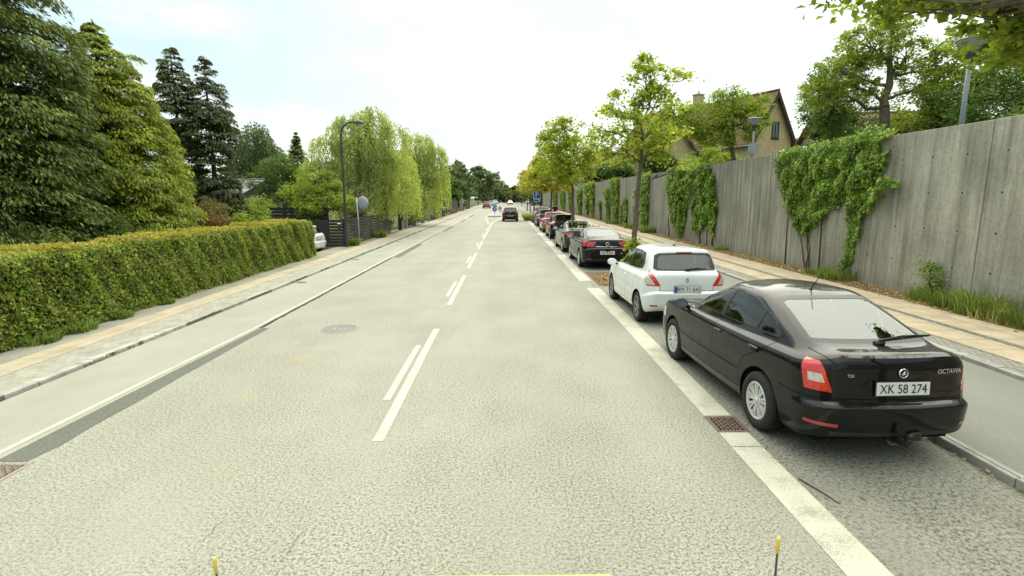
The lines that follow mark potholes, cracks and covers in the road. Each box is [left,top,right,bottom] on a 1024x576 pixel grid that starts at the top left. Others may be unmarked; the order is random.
drain grate [0,462,34,482]
drain grate [704,416,751,432]
manhole cover [320,324,360,333]
crack [280,529,306,561]
